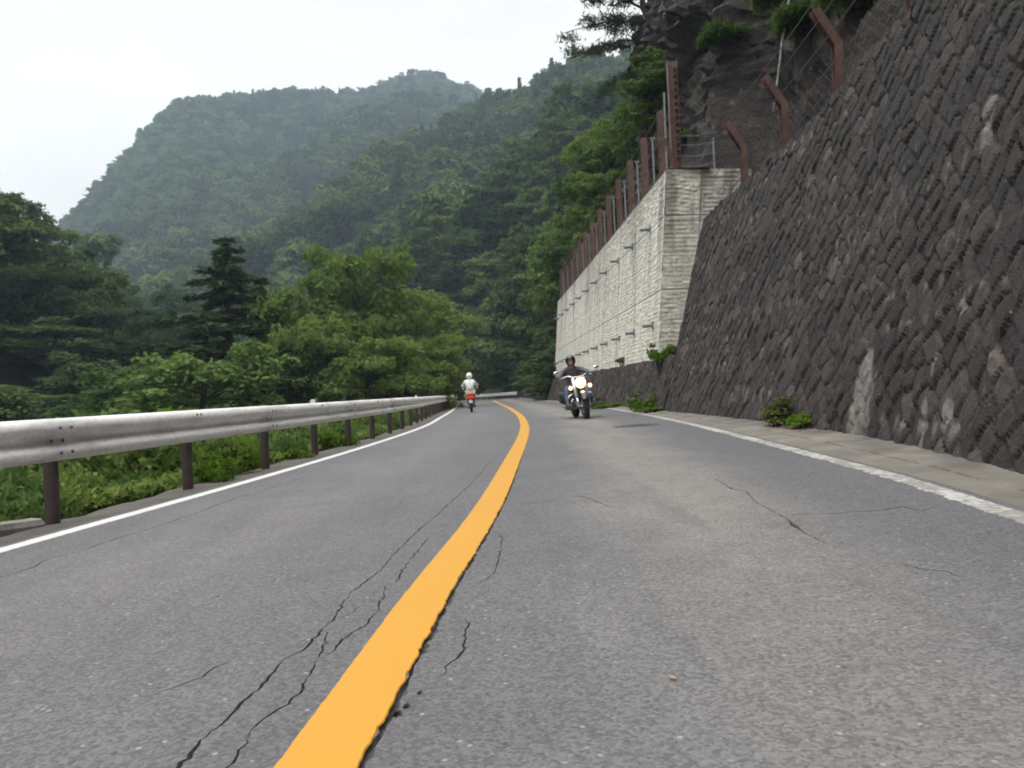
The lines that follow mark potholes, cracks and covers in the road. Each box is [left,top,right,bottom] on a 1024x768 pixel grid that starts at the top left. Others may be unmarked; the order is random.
crack [128,466,486,768]
crack [475,534,505,586]
crack [716,479,933,544]
